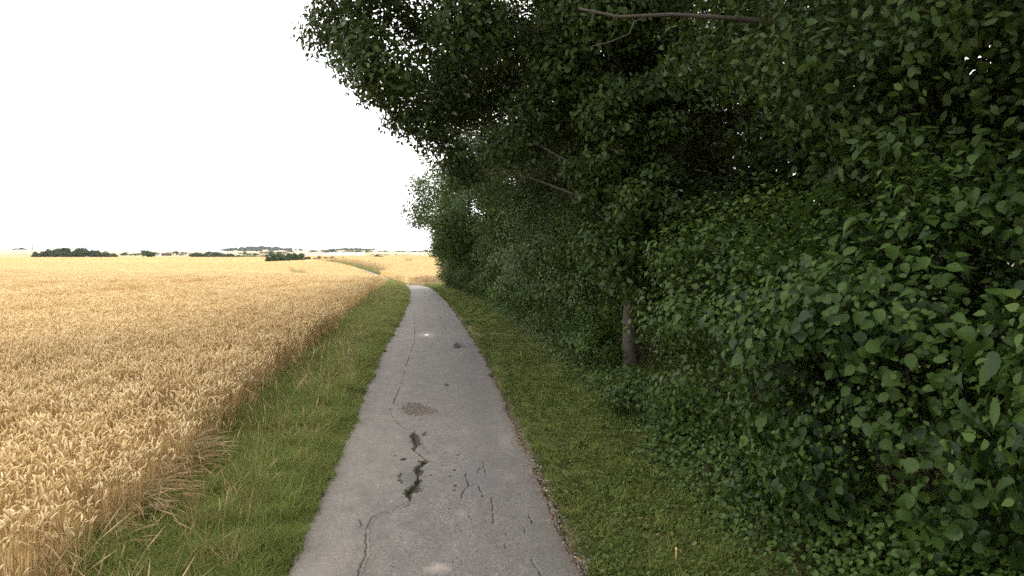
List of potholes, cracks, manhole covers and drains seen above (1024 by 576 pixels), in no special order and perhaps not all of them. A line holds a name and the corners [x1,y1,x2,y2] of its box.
crack [358,364,429,576]
pothole [403,480,423,500]
